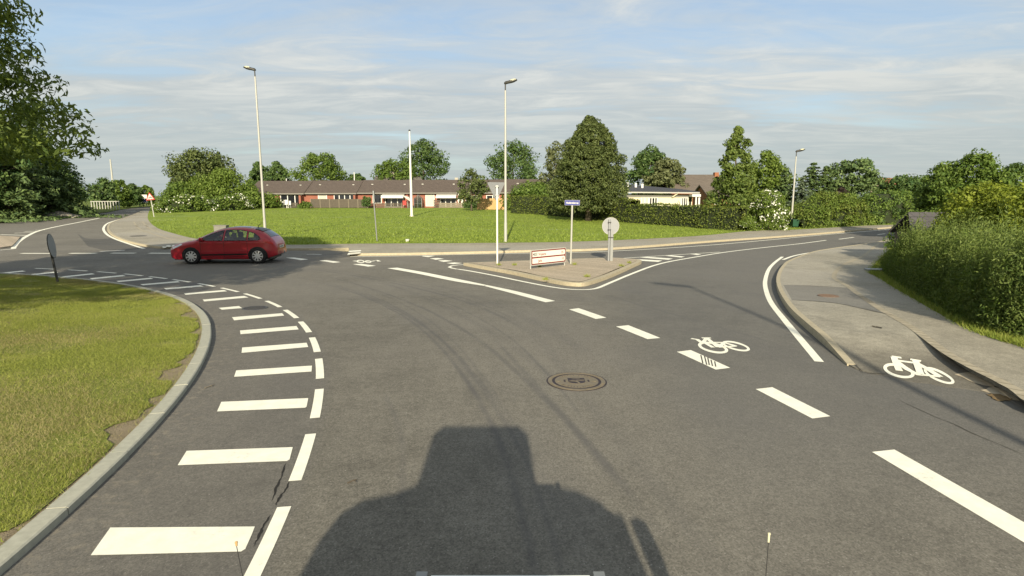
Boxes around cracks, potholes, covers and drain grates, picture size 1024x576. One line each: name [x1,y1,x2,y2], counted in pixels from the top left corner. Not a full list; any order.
crack [254,464,289,545]
manhole cover [546,372,607,391]
